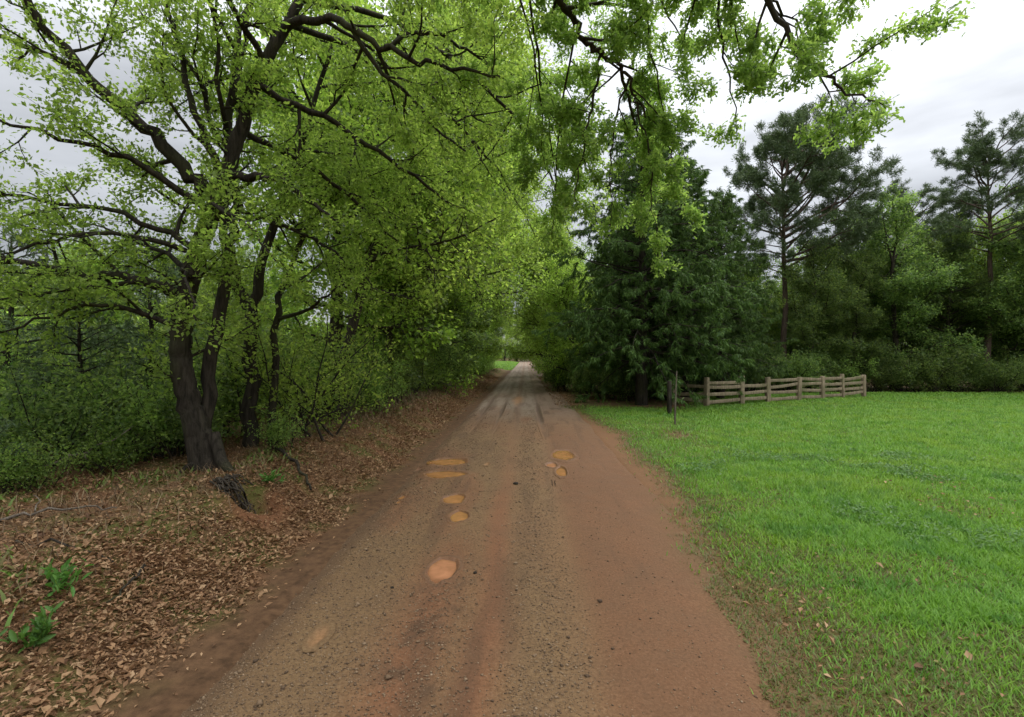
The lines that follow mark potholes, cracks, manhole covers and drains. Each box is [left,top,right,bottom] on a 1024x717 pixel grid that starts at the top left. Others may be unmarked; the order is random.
pothole [445,508,472,524]
pothole [437,492,469,506]
pothole [553,464,570,479]
pothole [301,623,336,653]
pothole [547,448,579,463]
pothole [416,469,475,480]
pothole [419,457,476,468]
pothole [420,554,464,589]
